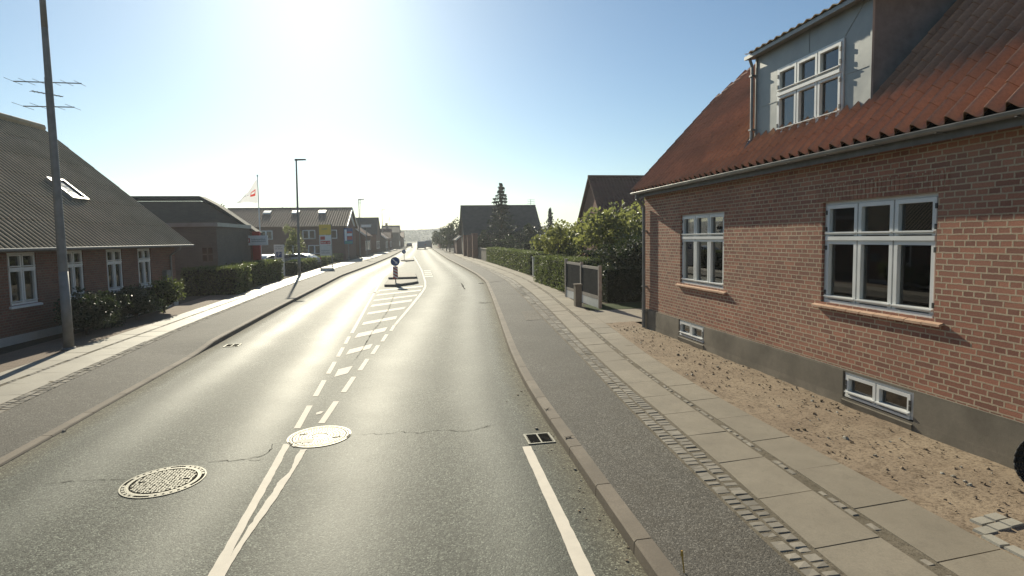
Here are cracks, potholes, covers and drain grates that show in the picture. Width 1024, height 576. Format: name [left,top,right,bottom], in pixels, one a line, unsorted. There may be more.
manhole cover [287,426,351,448]
drain grate [523,432,556,445]
manhole cover [118,465,207,499]
